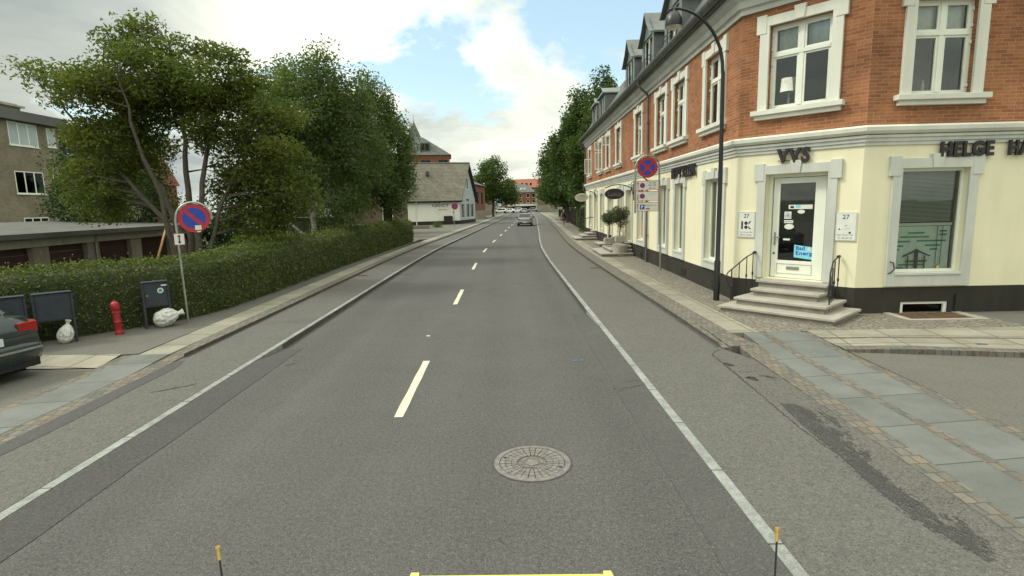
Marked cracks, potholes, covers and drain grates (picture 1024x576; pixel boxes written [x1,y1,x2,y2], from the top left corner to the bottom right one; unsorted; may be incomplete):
manhole cover [492,445,572,482]
